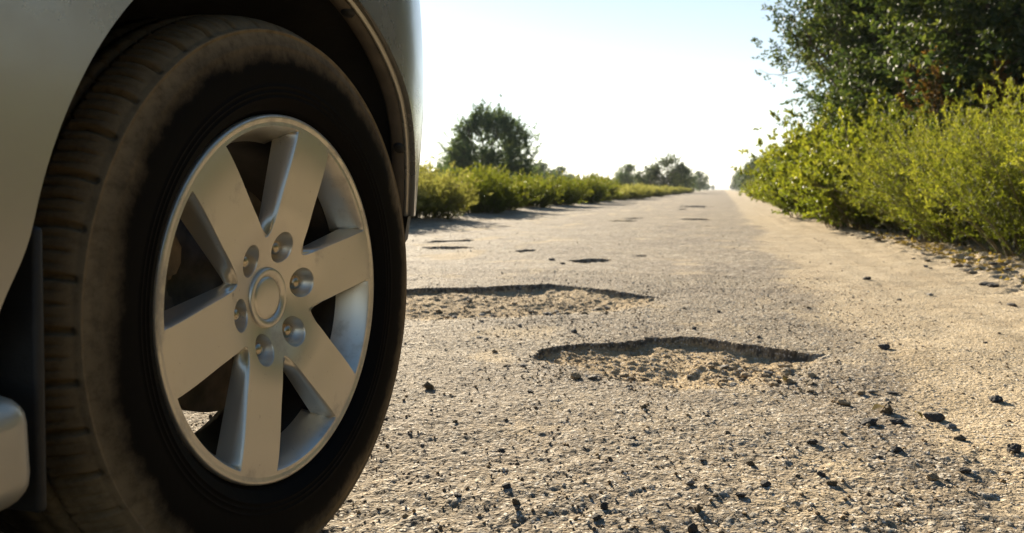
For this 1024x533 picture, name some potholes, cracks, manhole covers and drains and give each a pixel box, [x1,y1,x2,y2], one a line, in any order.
pothole [523,337,847,395]
pothole [405,284,698,324]
